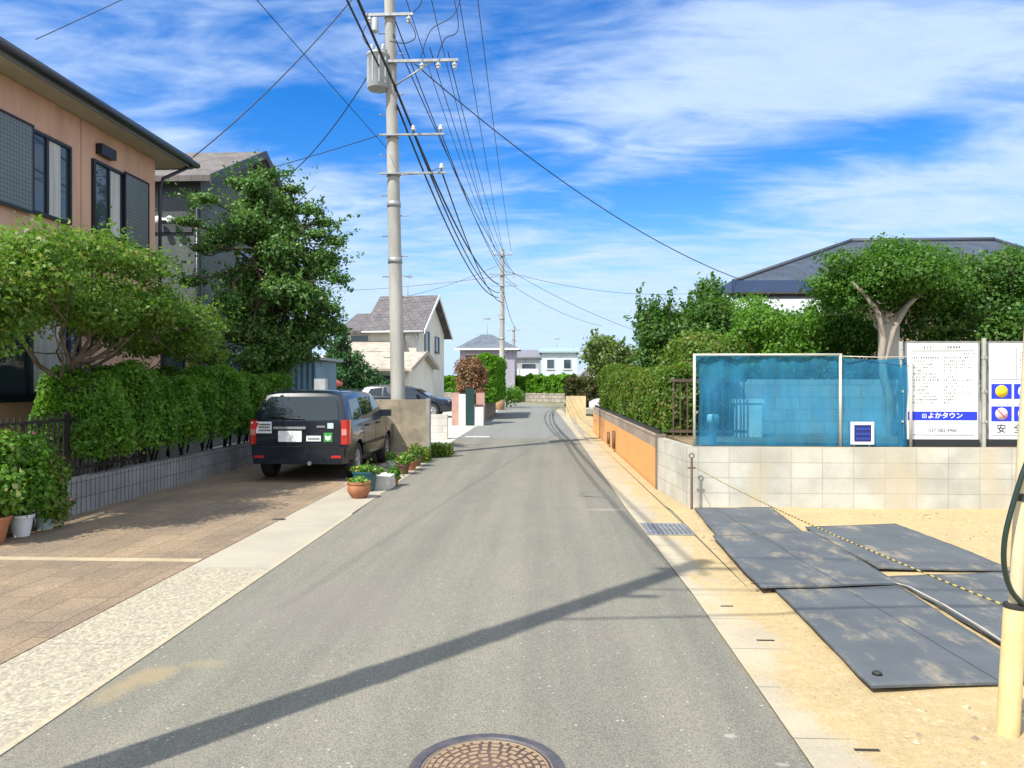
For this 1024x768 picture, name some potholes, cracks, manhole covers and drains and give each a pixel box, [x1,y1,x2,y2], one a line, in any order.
manhole cover [409,733,565,768]
drain grate [640,523,695,536]
